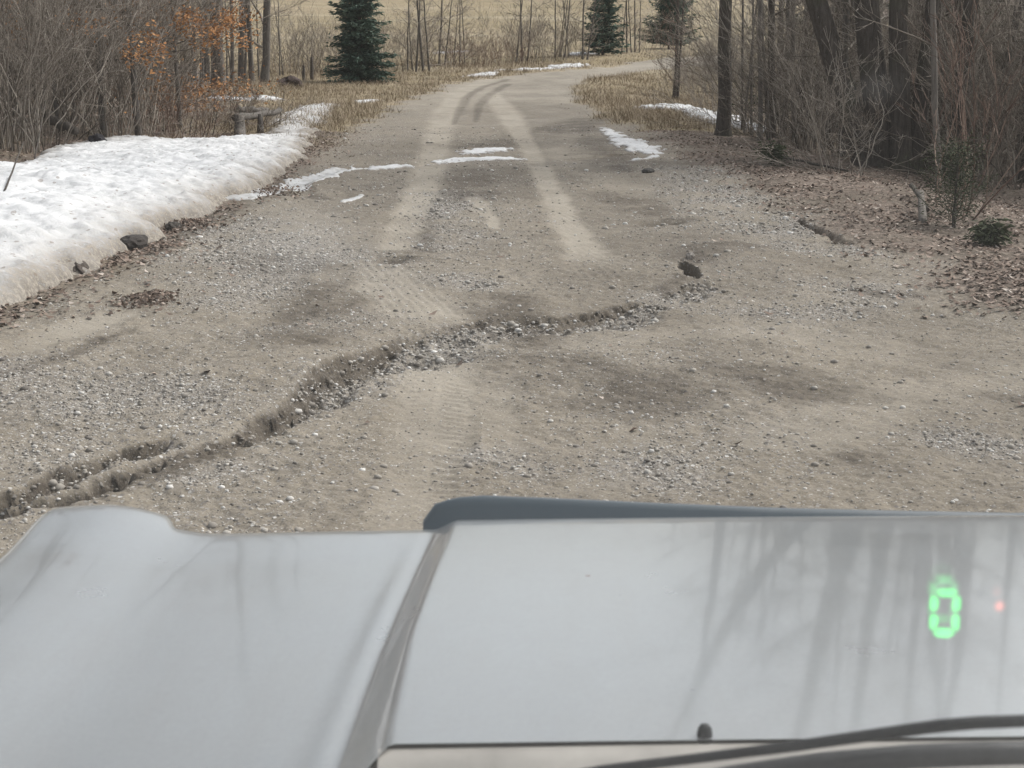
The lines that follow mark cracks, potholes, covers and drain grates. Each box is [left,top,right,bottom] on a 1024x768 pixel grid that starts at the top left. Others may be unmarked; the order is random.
crack [0,281,715,520]
